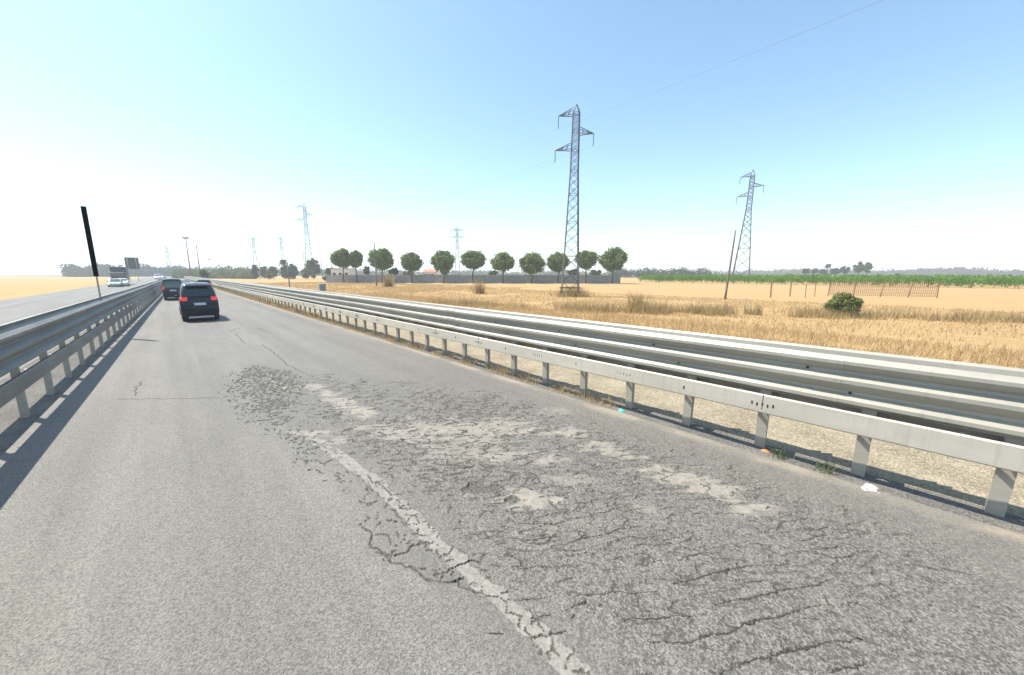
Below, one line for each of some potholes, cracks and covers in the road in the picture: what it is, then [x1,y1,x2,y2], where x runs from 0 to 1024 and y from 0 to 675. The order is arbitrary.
crack [218,330,1024,675]
